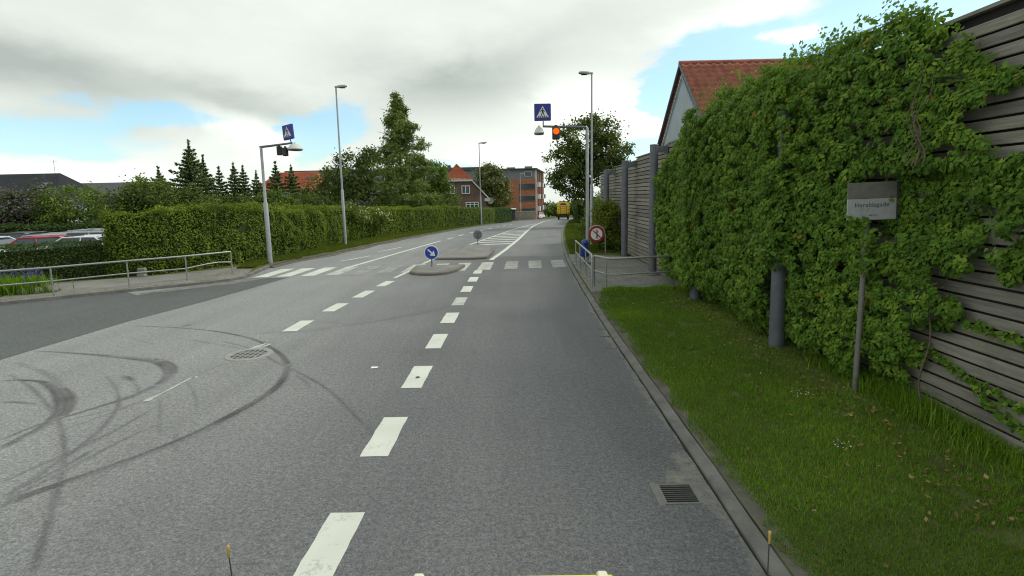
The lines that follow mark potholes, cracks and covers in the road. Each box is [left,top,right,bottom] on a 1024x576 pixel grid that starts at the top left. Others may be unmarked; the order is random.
drain grate [649,482,710,506]
